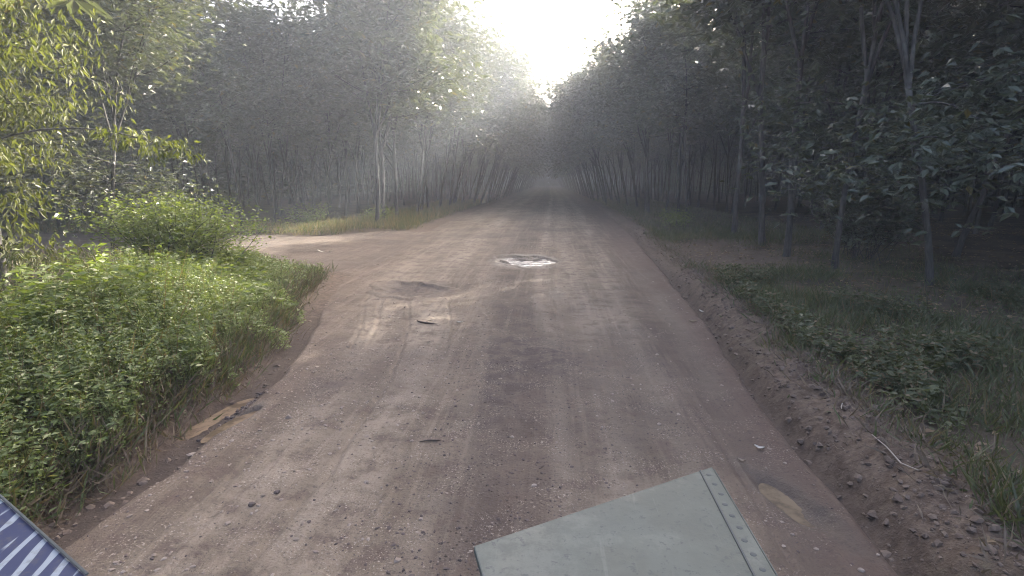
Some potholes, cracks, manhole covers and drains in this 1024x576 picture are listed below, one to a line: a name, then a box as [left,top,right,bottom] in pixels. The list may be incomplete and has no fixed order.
pothole [366,279,461,301]
pothole [490,254,566,269]
